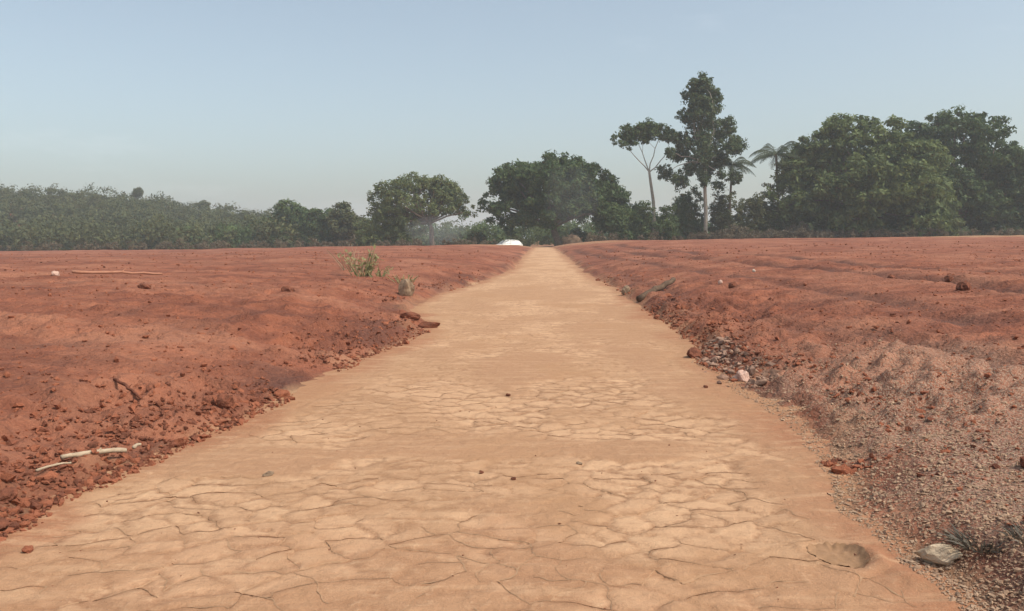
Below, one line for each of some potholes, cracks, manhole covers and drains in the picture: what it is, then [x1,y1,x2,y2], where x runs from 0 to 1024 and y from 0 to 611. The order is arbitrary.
crack [3,472,916,611]
pothole [807,541,870,568]
crack [257,383,747,443]
